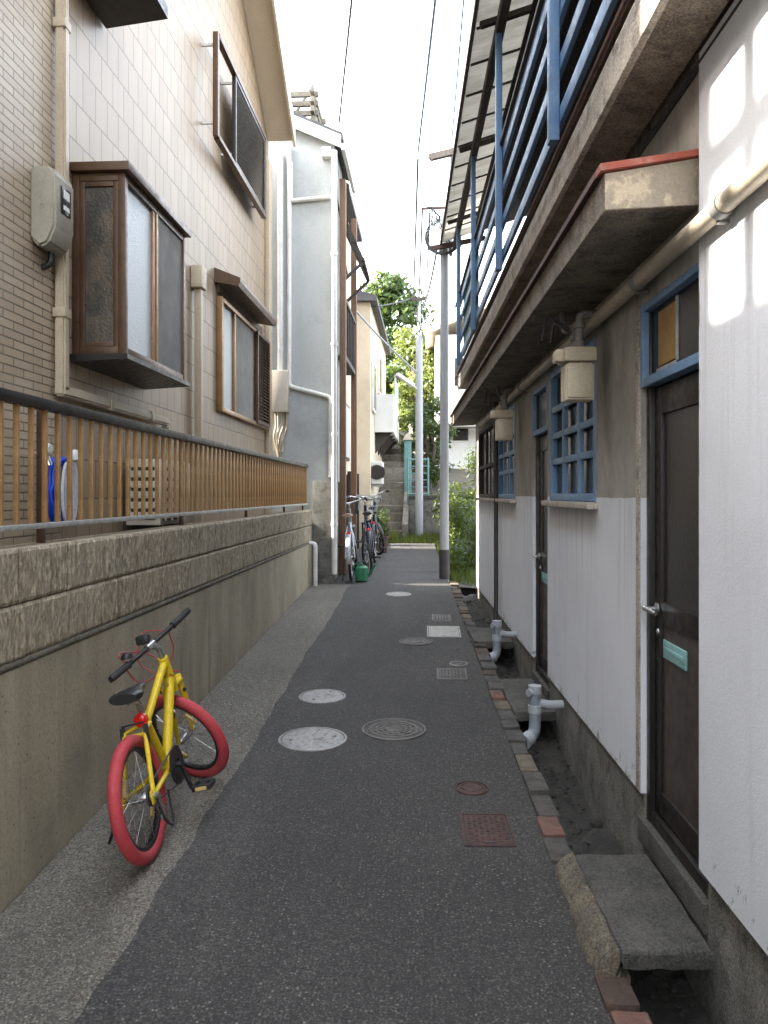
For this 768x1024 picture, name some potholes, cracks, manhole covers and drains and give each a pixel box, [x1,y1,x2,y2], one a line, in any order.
manhole cover [399,637,433,646]
manhole cover [427,626,461,637]
manhole cover [299,689,346,704]
manhole cover [278,727,347,752]
manhole cover [455,781,489,796]
manhole cover [460,813,517,847]
manhole cover [362,718,426,741]
